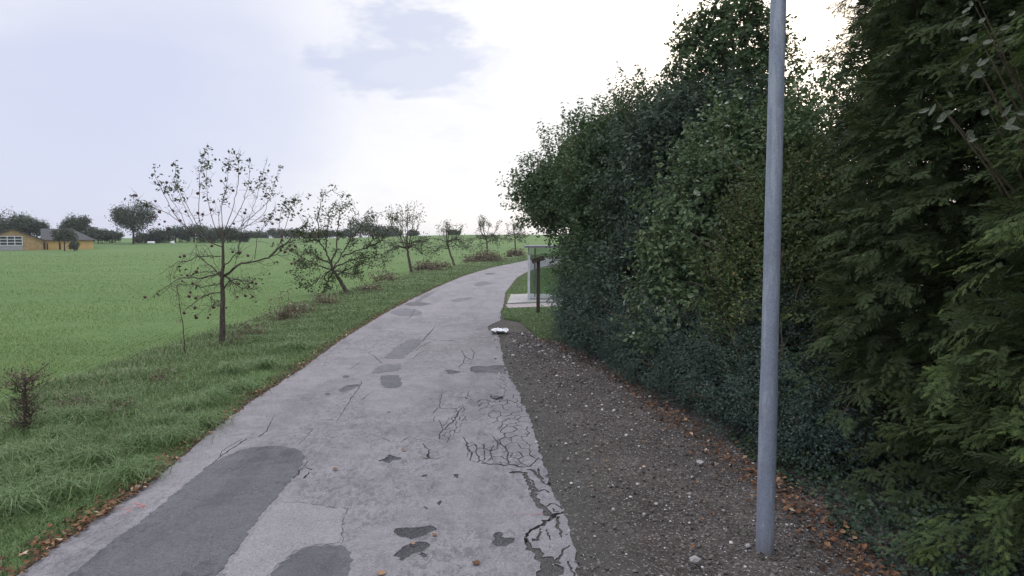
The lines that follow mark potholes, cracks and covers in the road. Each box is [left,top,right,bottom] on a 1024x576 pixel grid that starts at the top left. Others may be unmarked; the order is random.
crack [389,378,576,576]
pothole [492,532,515,547]
pothole [394,526,437,540]
pothole [394,542,430,561]
